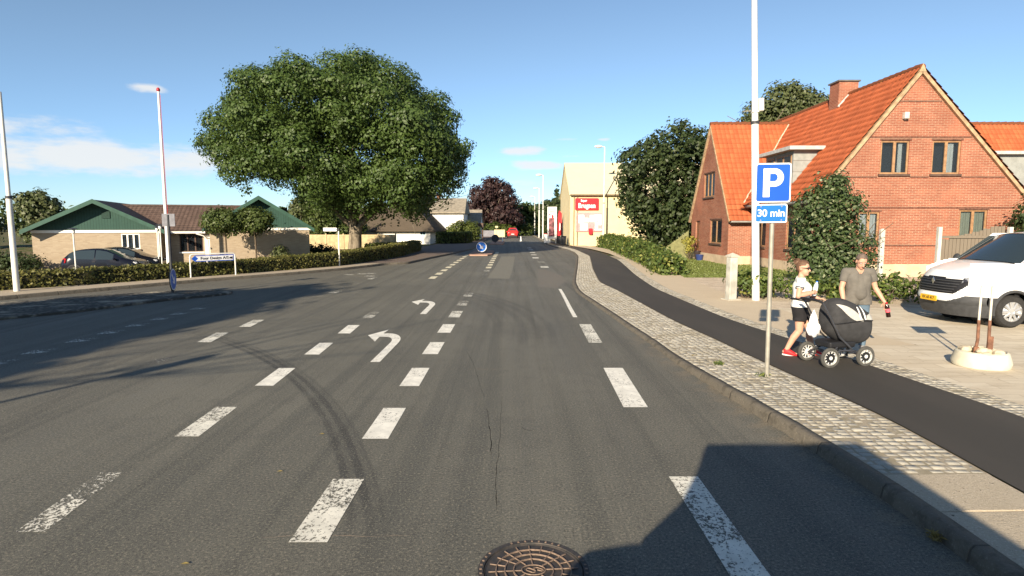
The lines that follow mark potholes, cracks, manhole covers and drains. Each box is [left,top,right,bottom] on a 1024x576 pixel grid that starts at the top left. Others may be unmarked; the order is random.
manhole cover [478,540,590,576]
crack [467,352,502,509]
